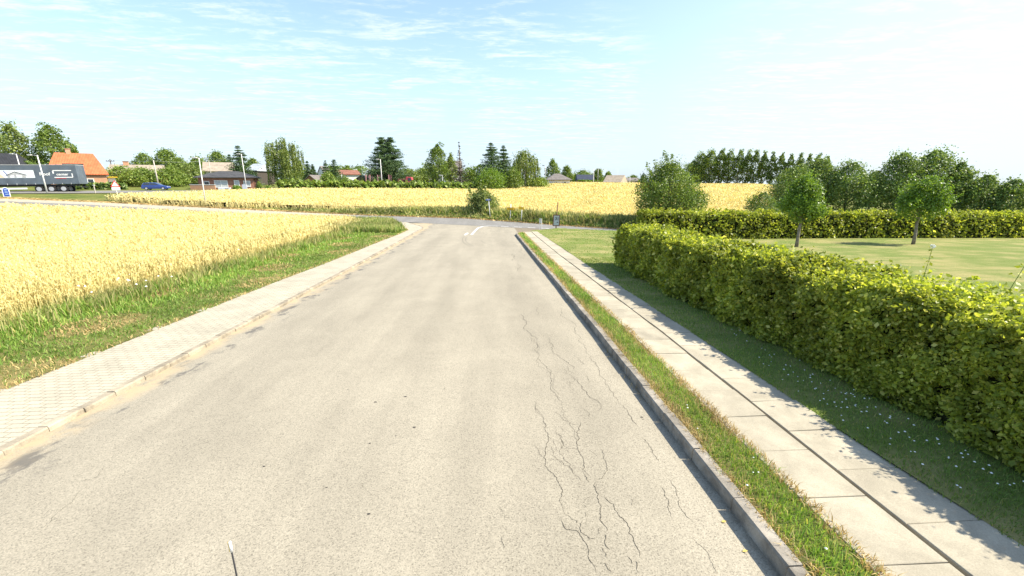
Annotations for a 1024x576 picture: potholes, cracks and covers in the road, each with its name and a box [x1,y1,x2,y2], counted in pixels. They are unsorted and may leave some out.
crack [519,313,640,573]
